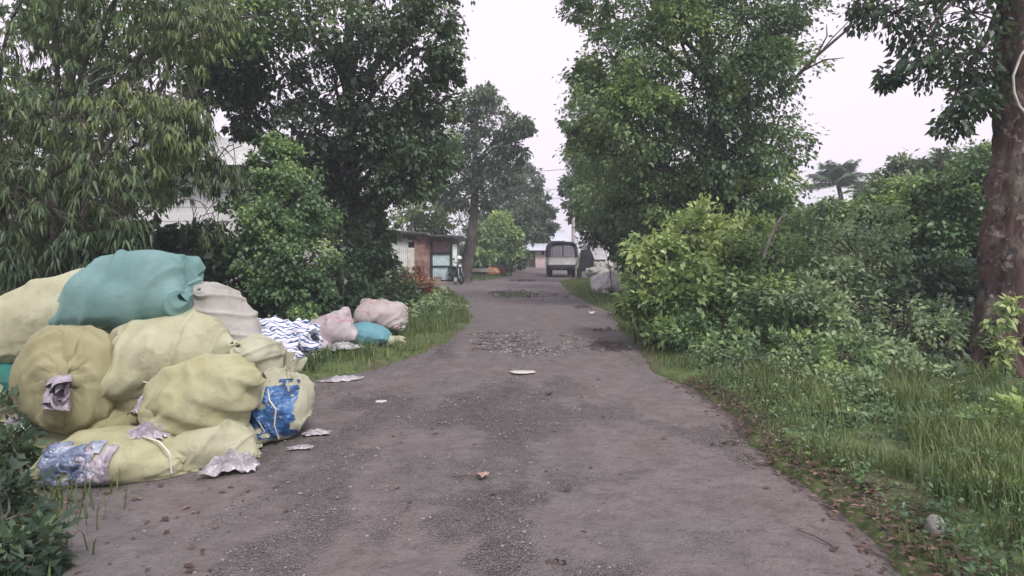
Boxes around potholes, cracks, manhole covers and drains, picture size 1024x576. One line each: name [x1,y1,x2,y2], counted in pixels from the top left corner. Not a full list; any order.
pothole [488,289,549,298]
pothole [583,338,636,352]
